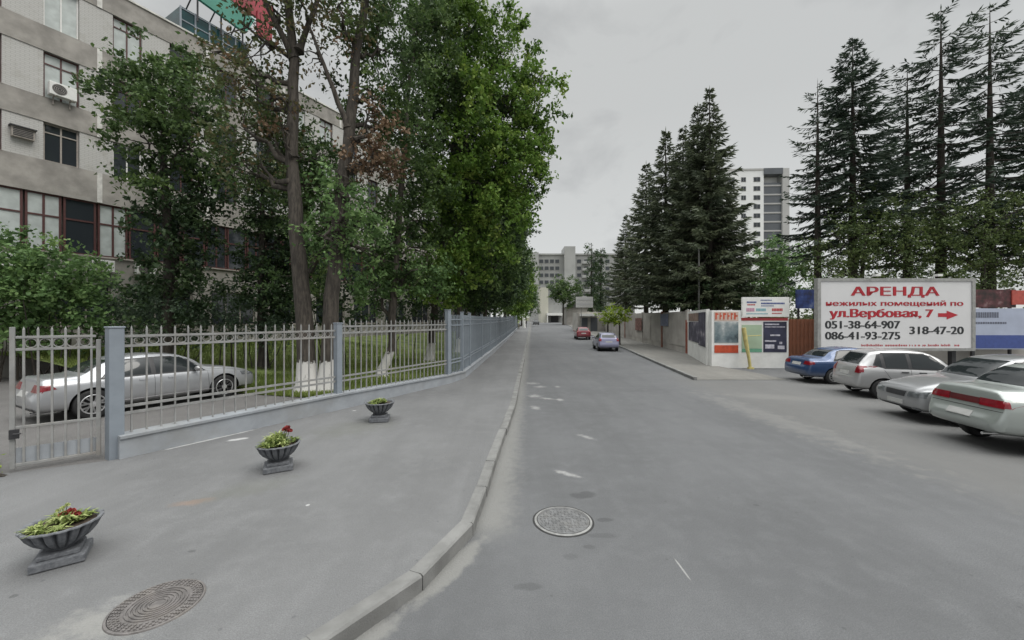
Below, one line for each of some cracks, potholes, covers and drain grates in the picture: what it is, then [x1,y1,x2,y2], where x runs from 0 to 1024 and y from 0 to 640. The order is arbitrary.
manhole cover [533,506,594,538]
manhole cover [102,579,206,636]
